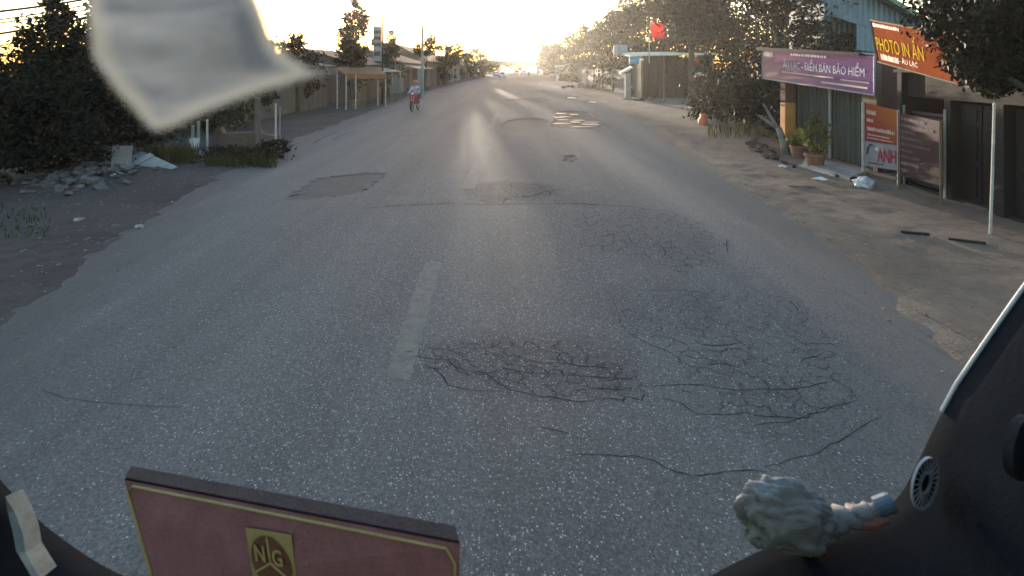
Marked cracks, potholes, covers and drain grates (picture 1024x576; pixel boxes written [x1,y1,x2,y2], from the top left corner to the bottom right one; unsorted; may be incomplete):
crack [42,390,174,407]
crack [580,289,877,476]
pothole [500,118,551,130]
crack [372,184,730,274]
crack [406,339,645,404]
pothole [550,111,610,129]
